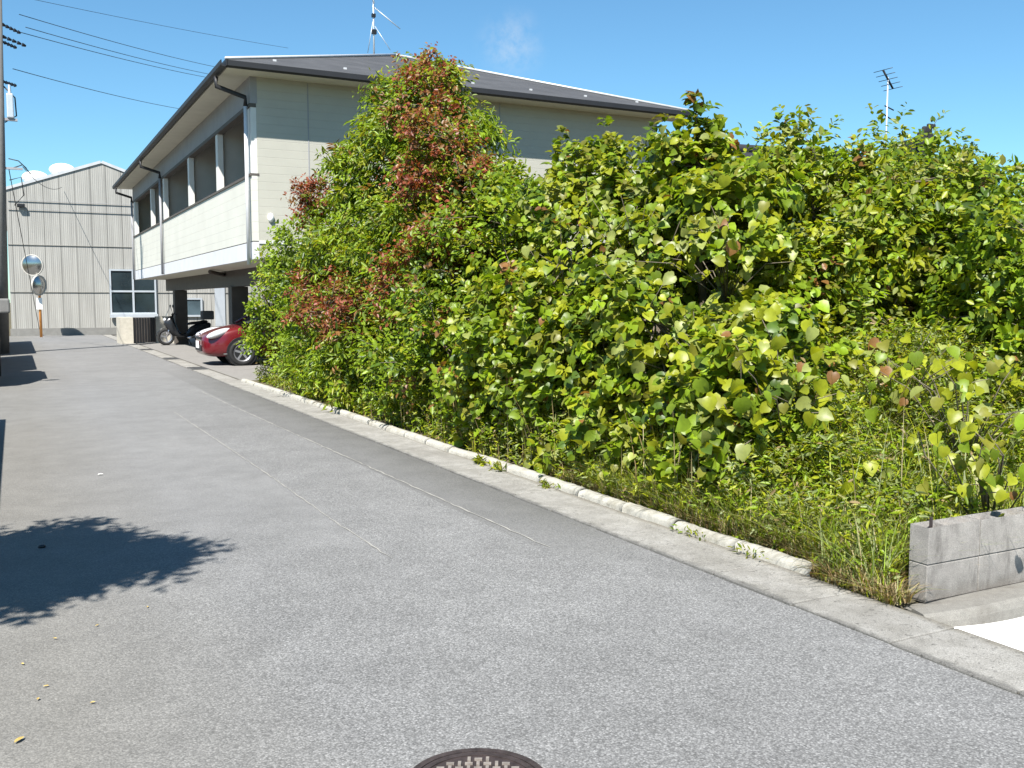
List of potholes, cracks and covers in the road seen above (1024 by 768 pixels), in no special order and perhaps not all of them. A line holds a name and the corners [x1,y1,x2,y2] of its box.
manhole cover [414,748,542,768]
